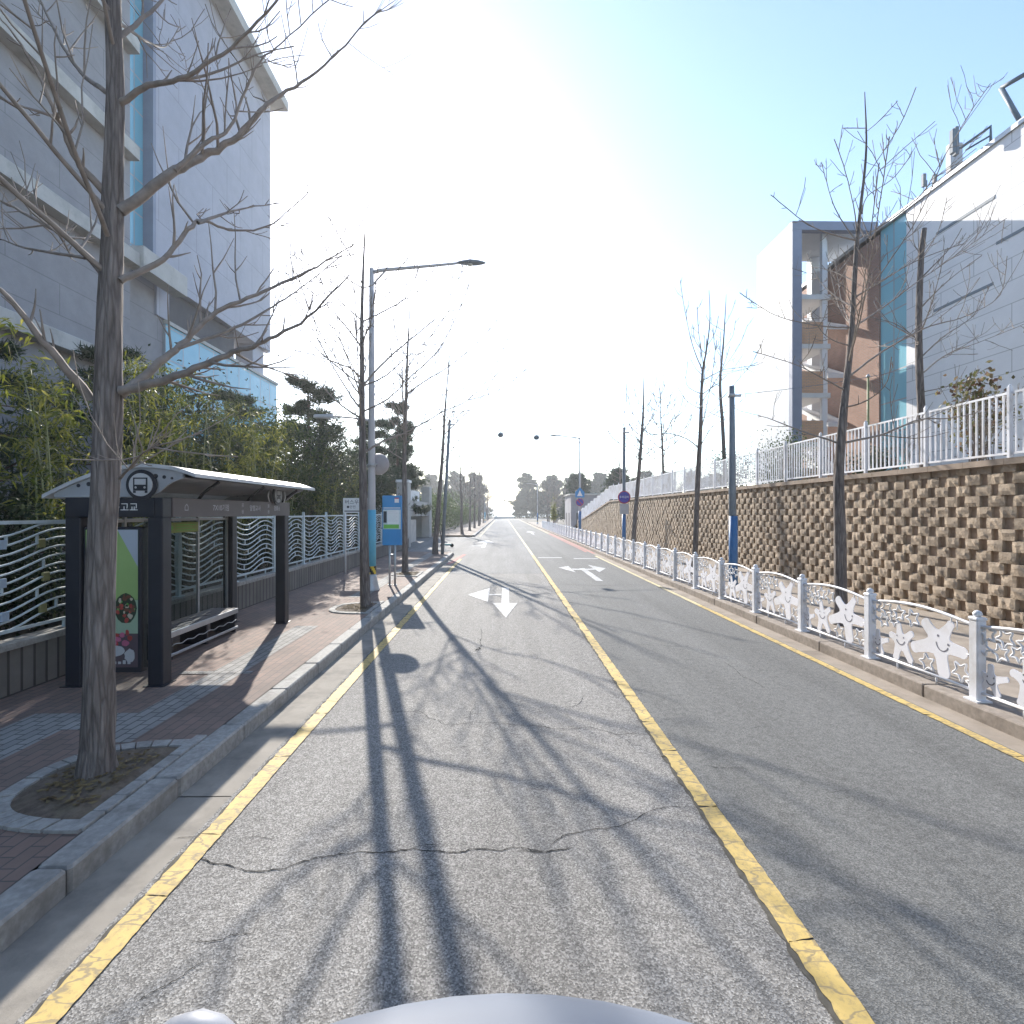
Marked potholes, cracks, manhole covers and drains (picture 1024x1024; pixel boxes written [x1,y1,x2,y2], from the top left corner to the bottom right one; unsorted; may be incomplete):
crack [200,806,695,872]
